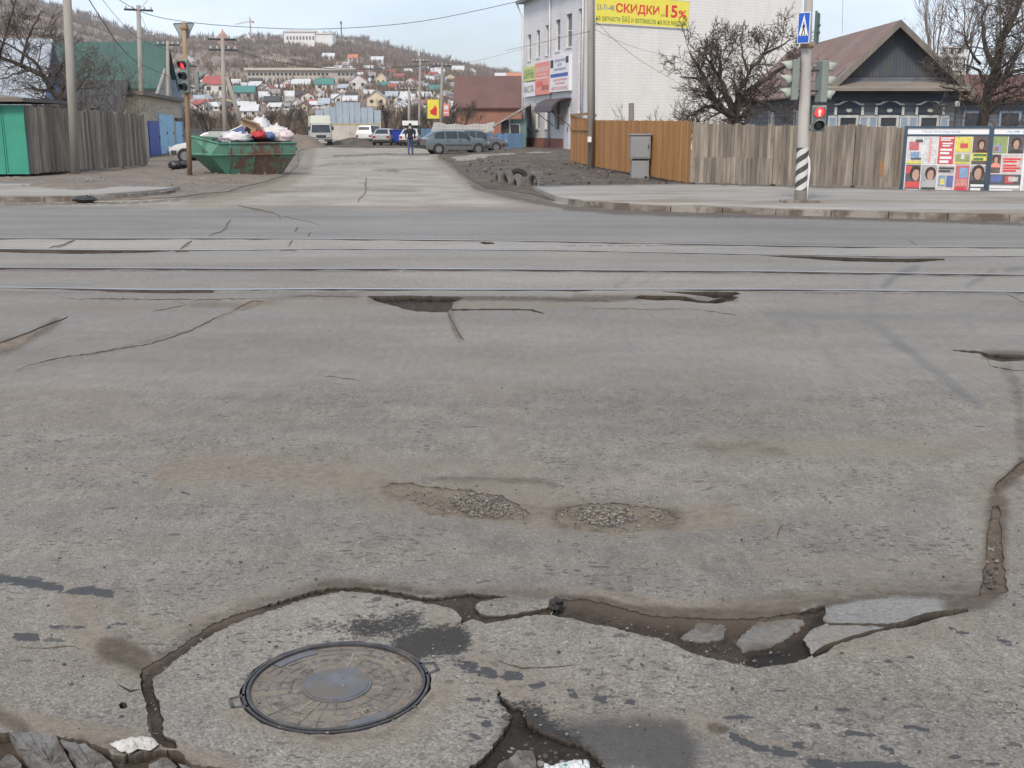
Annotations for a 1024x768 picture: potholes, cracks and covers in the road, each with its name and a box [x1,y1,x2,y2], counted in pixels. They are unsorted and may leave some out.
pothole [551,598,826,668]
crack [0,300,263,369]
pothole [366,295,544,314]
pothole [953,350,1024,371]
crack [116,586,577,749]
crack [175,205,318,252]
pothole [635,291,740,304]
pothole [556,494,680,535]
pothole [382,481,530,522]
manhole cover [228,641,440,735]
pothole [469,689,605,768]
crack [448,314,464,340]
